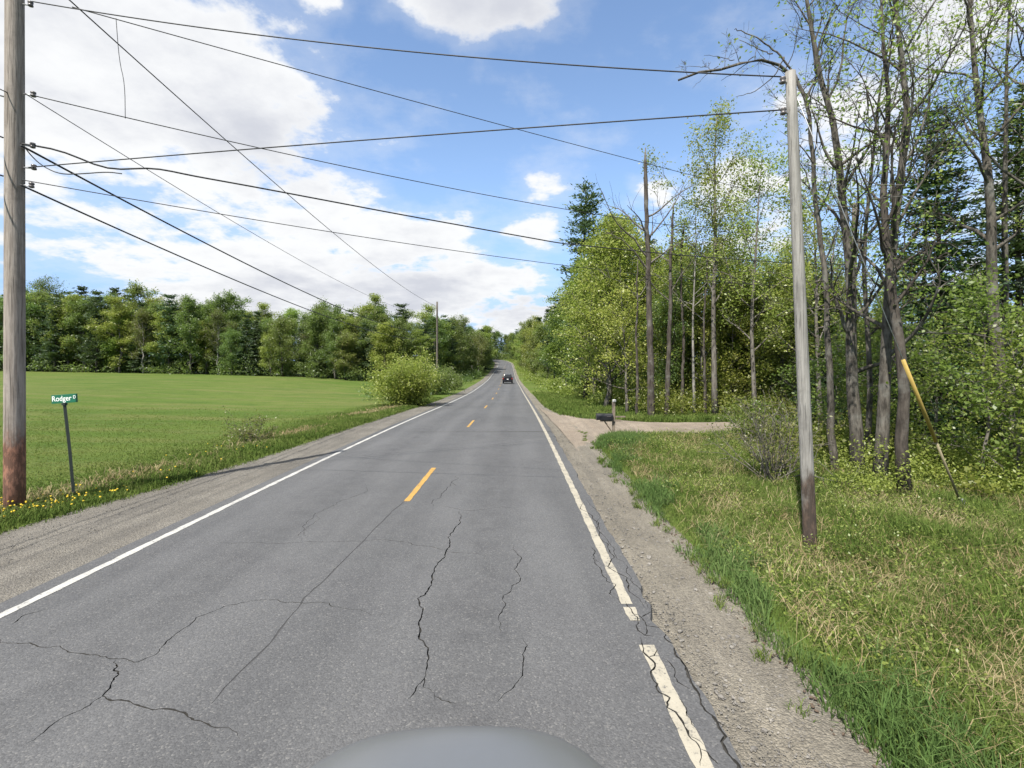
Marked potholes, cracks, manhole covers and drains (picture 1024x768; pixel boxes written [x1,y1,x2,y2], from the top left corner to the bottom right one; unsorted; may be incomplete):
crack [497,640,528,702]
crack [580,503,741,768]
crack [215,484,522,704]
crack [0,599,373,745]
